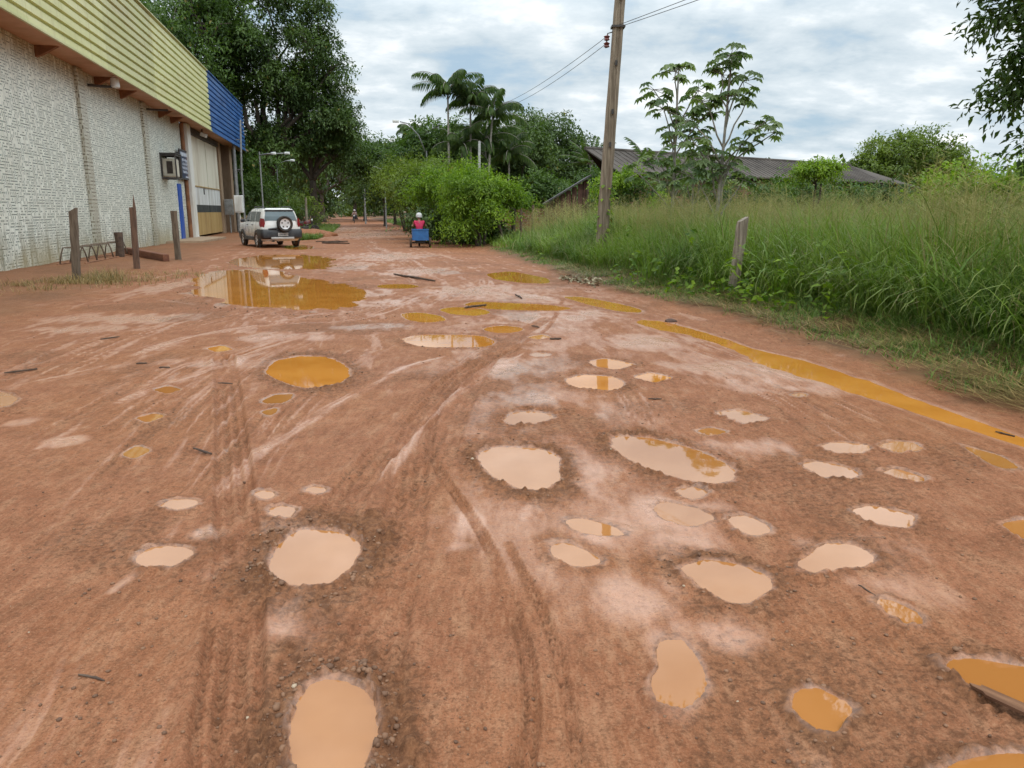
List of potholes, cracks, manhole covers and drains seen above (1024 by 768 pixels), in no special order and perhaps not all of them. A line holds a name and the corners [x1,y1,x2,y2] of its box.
pothole [594,429,757,493]
pothole [779,536,895,582]
pothole [391,333,509,349]
pothole [464,440,570,497]
pothole [173,268,380,317]
pothole [252,518,374,597]
pothole [255,351,365,394]
pothole [531,531,626,577]
pothole [790,457,878,483]
pothole [552,371,638,394]
pothole [265,656,401,768]
pothole [663,550,790,615]
